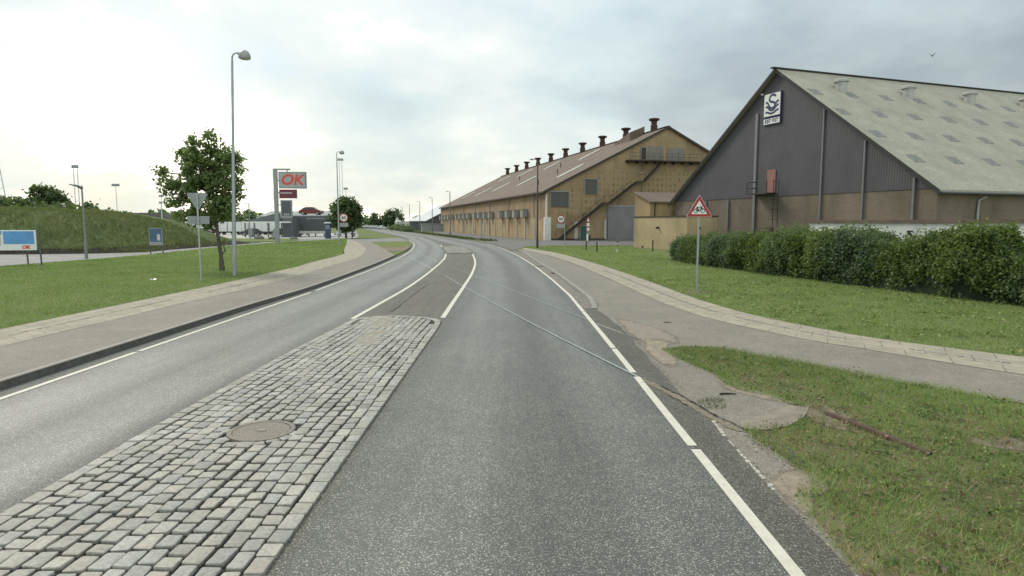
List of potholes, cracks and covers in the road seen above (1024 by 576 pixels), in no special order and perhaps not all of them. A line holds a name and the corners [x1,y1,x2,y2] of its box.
manhole cover [226,420,296,443]
